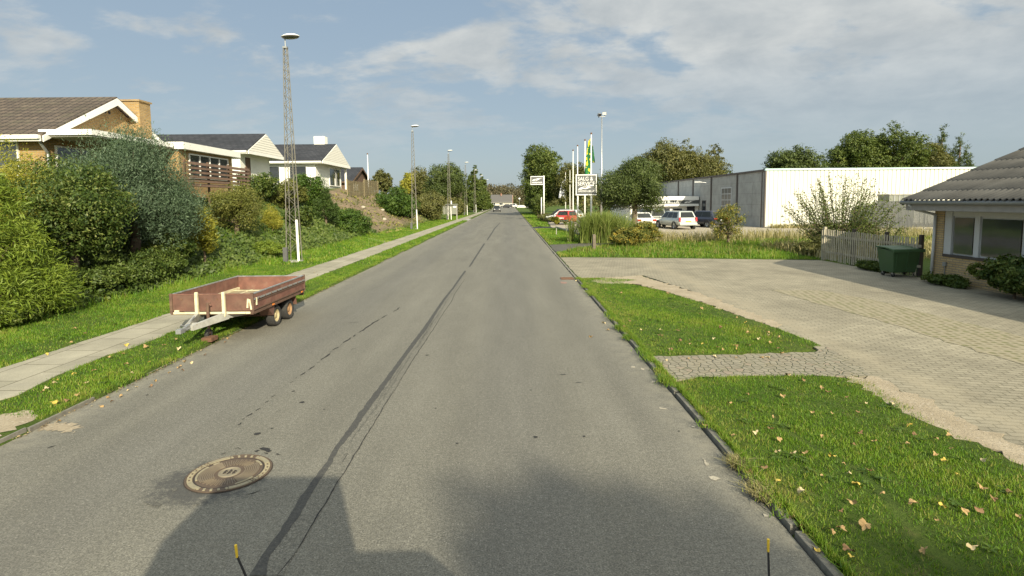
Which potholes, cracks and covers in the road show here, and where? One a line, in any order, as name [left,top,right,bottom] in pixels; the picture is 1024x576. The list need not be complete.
crack [238,307,400,425]
manhole cover [183,454,273,494]
